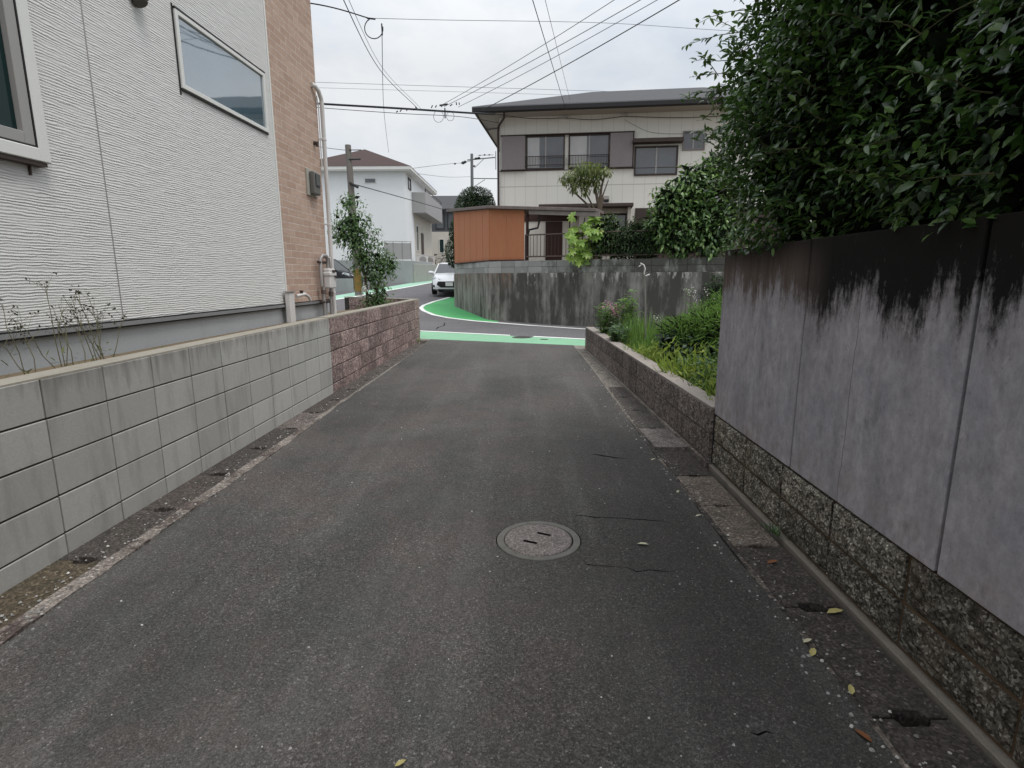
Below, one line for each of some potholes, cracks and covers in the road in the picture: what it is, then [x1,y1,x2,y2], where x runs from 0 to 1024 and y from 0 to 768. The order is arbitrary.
manhole cover [497,521,580,561]
